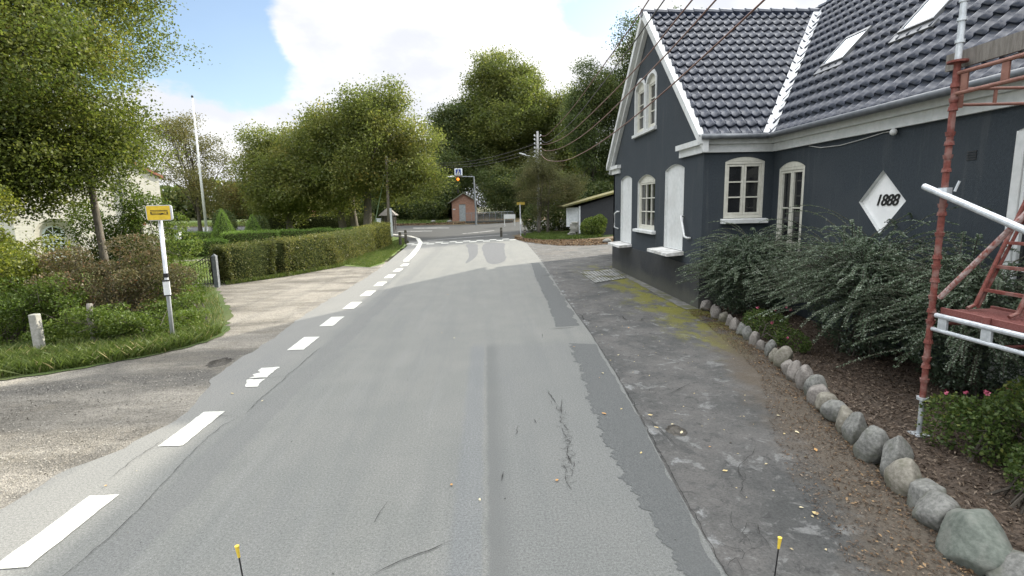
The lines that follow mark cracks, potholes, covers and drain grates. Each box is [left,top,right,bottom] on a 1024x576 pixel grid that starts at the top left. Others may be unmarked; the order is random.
pothole [205,357,234,368]
pothole [665,425,687,436]
